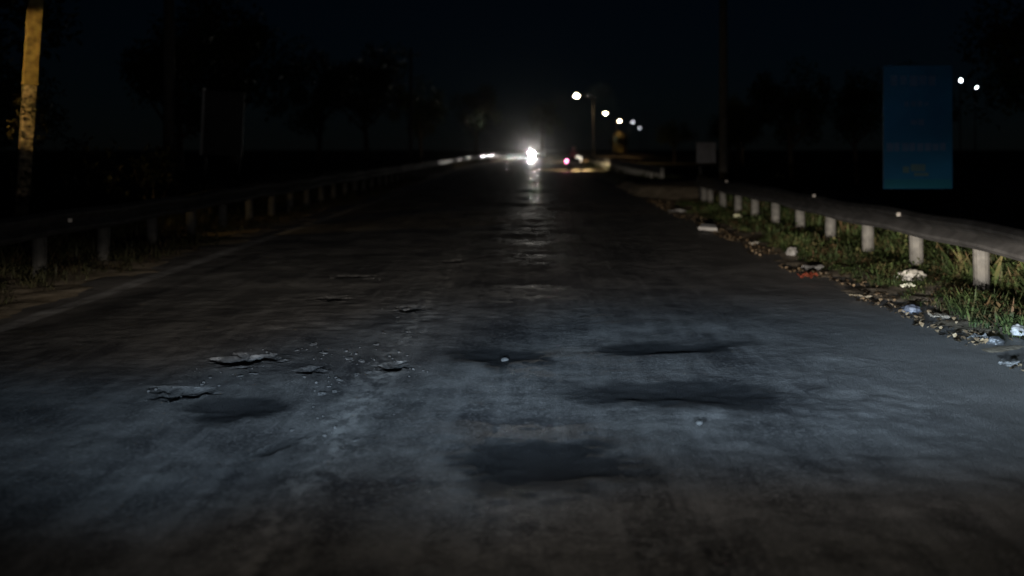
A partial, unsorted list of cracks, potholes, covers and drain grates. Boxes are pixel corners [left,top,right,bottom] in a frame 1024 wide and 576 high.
pothole [552,378,810,413]
pothole [374,358,412,373]
pothole [583,341,747,357]
pothole [205,351,291,370]
pothole [181,396,296,424]
pothole [445,348,559,369]
pothole [440,438,664,499]
pothole [143,385,234,402]
